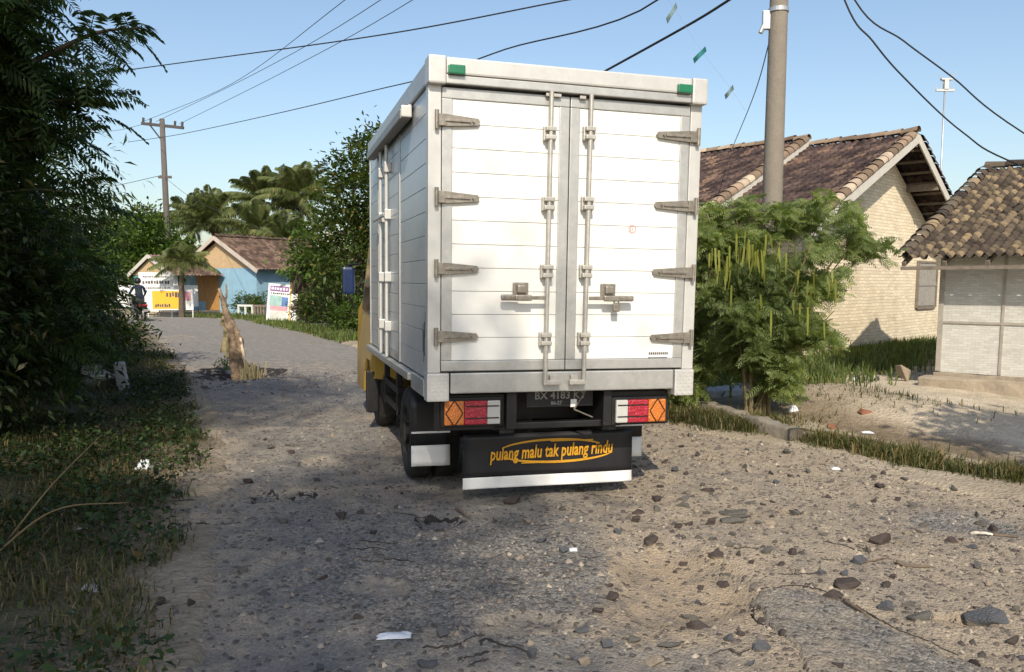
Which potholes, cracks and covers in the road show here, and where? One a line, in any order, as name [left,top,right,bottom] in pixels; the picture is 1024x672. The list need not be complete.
crack [348,540,415,562]
crack [422,635,526,665]
crack [750,573,959,656]
